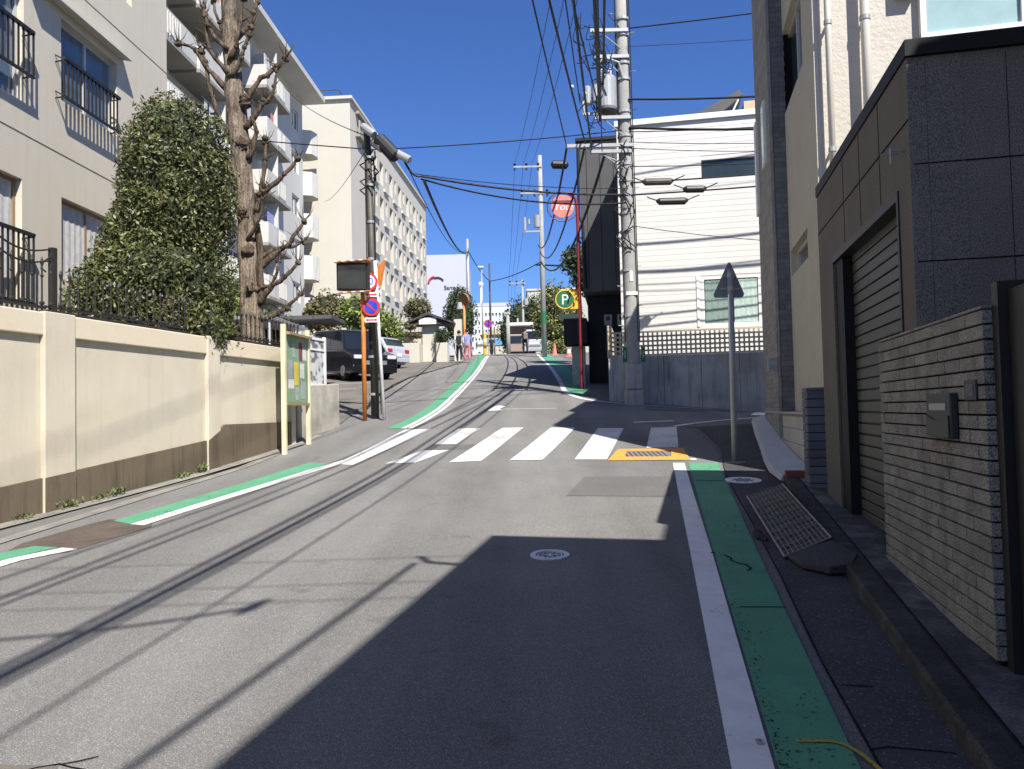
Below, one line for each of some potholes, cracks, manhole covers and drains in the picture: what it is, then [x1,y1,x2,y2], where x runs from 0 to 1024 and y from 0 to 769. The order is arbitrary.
crack [869,746,956,754]
manhole cover [530,549,570,560]
